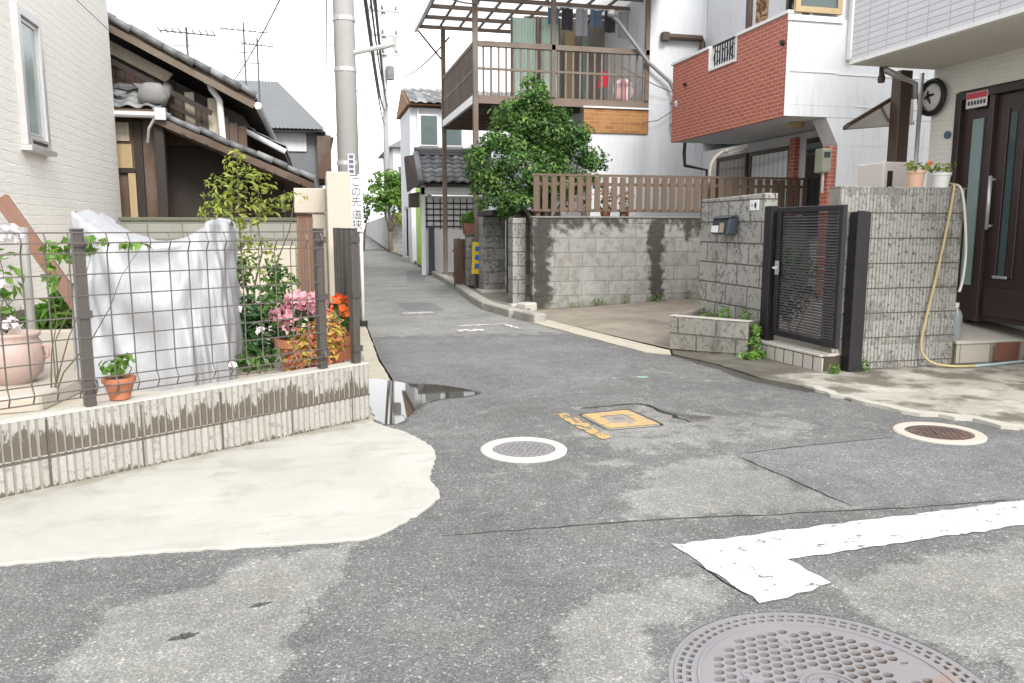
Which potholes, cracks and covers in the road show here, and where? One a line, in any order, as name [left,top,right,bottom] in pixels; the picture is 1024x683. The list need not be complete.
crack [580,403,689,422]
manhole cover [669,612,984,683]
manhole cover [578,409,664,430]
manhole cover [892,422,988,445]
manhole cover [480,437,567,463]
